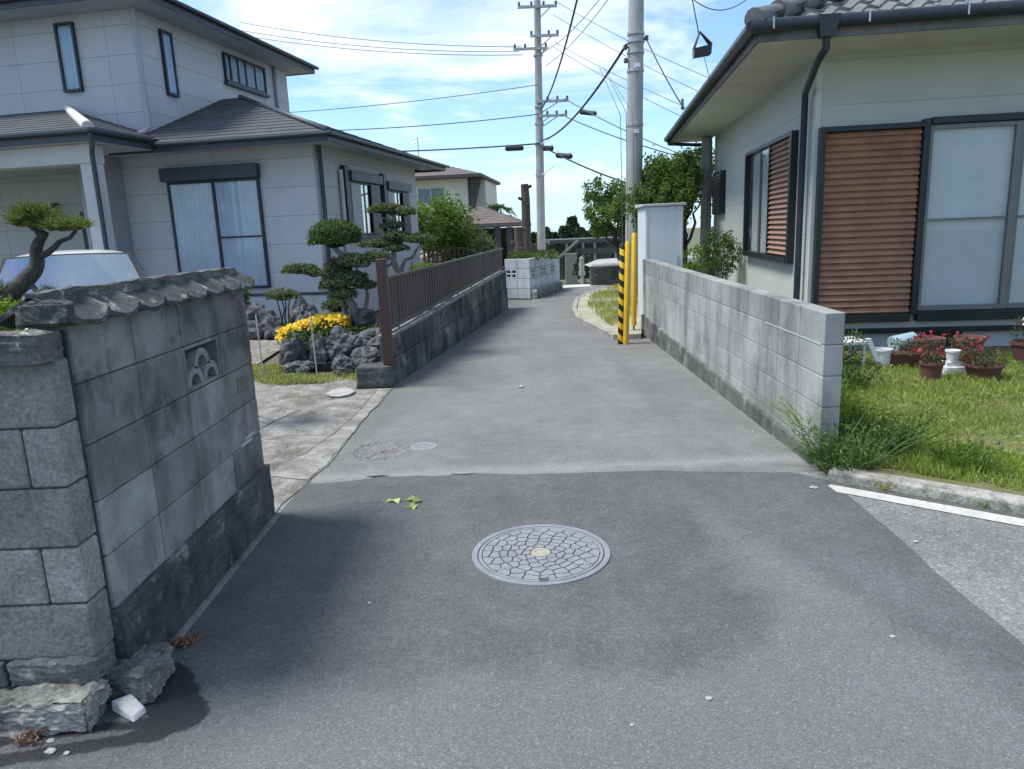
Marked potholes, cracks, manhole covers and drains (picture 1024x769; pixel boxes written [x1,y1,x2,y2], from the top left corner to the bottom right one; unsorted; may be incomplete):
utility cover [411,442,437,451]
manhole cover [472,524,610,587]
